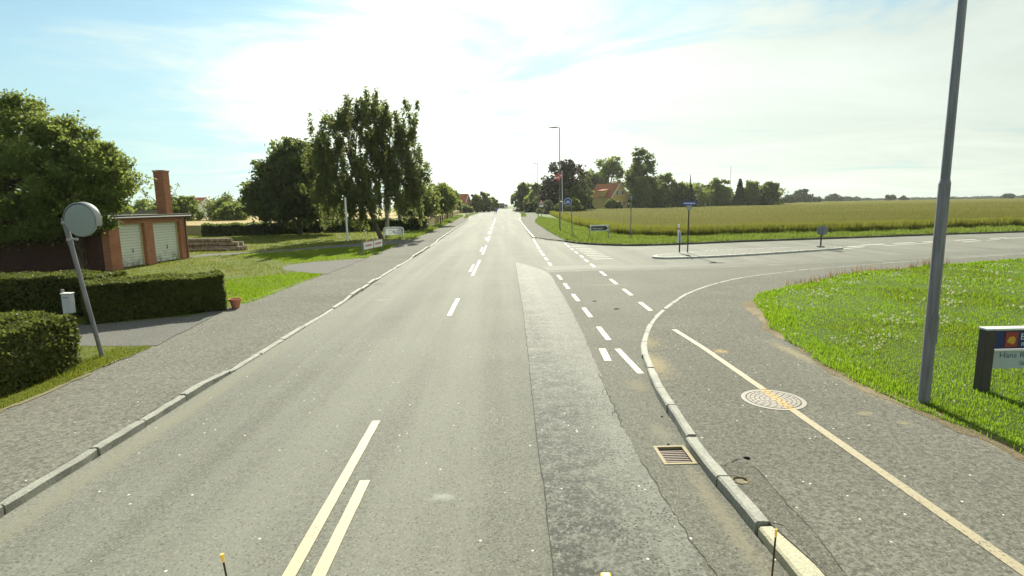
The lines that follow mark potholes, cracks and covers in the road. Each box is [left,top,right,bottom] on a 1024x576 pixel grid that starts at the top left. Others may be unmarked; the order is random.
utility cover [732,476,750,484]
crack [724,458,845,572]
manhole cover [741,390,807,411]
drain grate [653,445,698,465]
